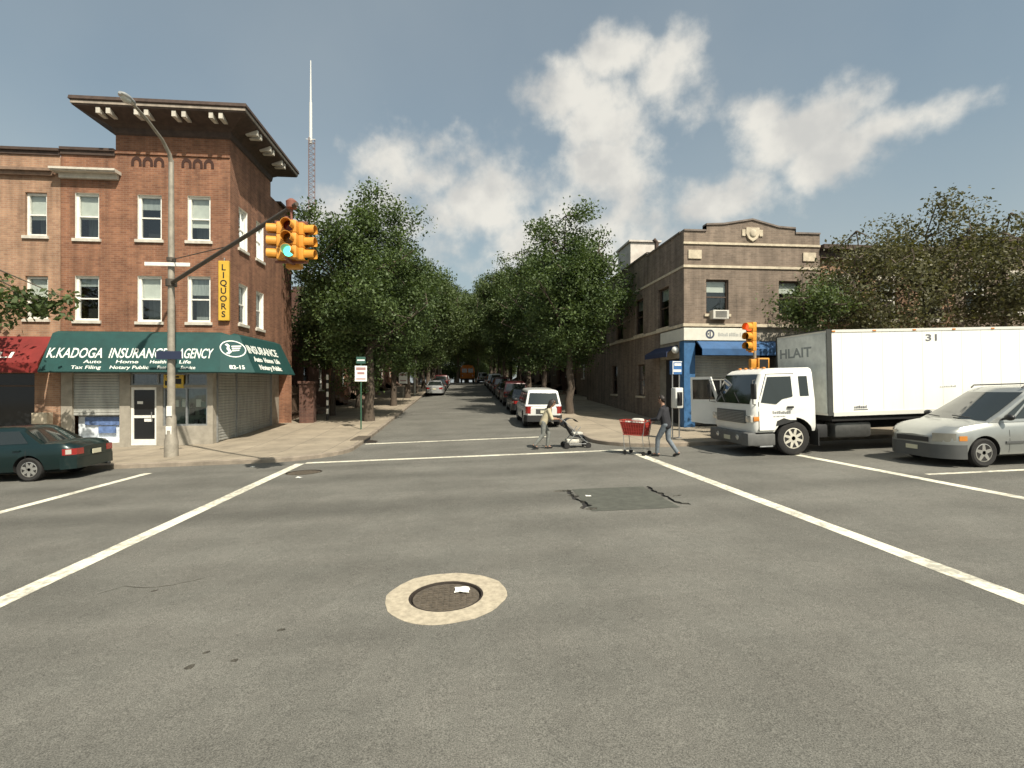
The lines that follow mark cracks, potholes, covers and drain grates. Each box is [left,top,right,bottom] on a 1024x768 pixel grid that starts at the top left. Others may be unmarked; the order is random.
crack [563,490,592,509]
crack [99,578,203,594]
crack [646,486,691,505]
manhole cover [385,573,507,625]
